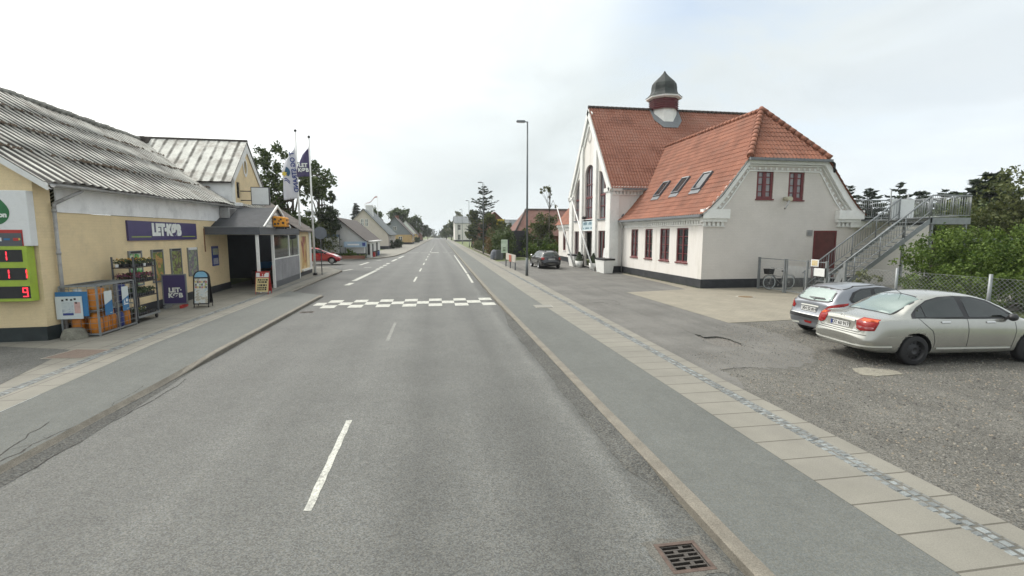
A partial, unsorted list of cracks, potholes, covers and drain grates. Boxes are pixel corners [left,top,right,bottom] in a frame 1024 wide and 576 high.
drain grate [653,540,717,574]
crack [0,422,80,474]
